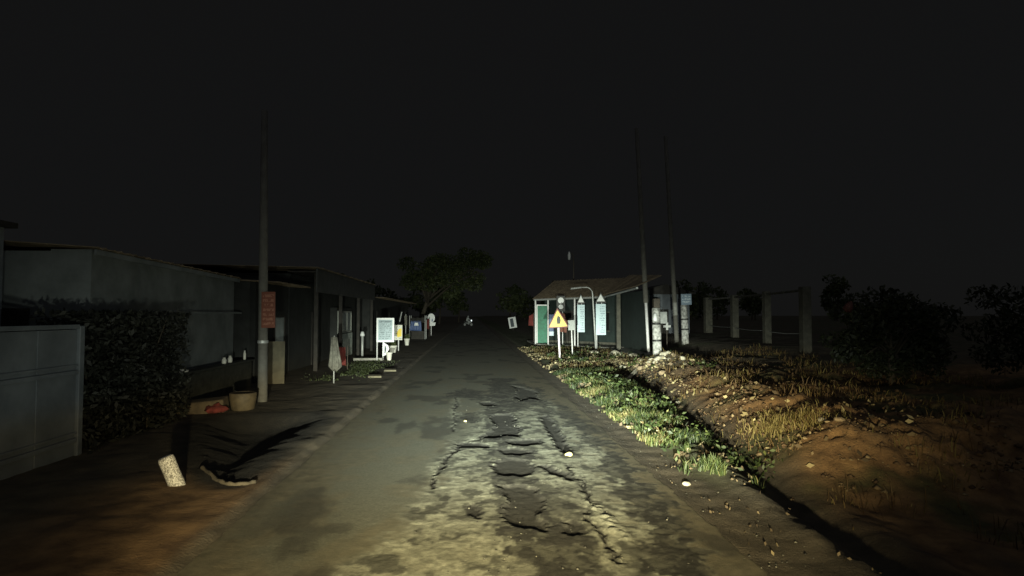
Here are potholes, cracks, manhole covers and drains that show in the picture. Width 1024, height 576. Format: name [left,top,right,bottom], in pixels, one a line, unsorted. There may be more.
pothole [495,483,554,537]
crack [565,463,626,564]
crack [430,397,485,489]
pothole [480,413,523,439]
pothole [553,517,589,537]
pothole [510,385,541,401]
pothole [489,457,538,477]
